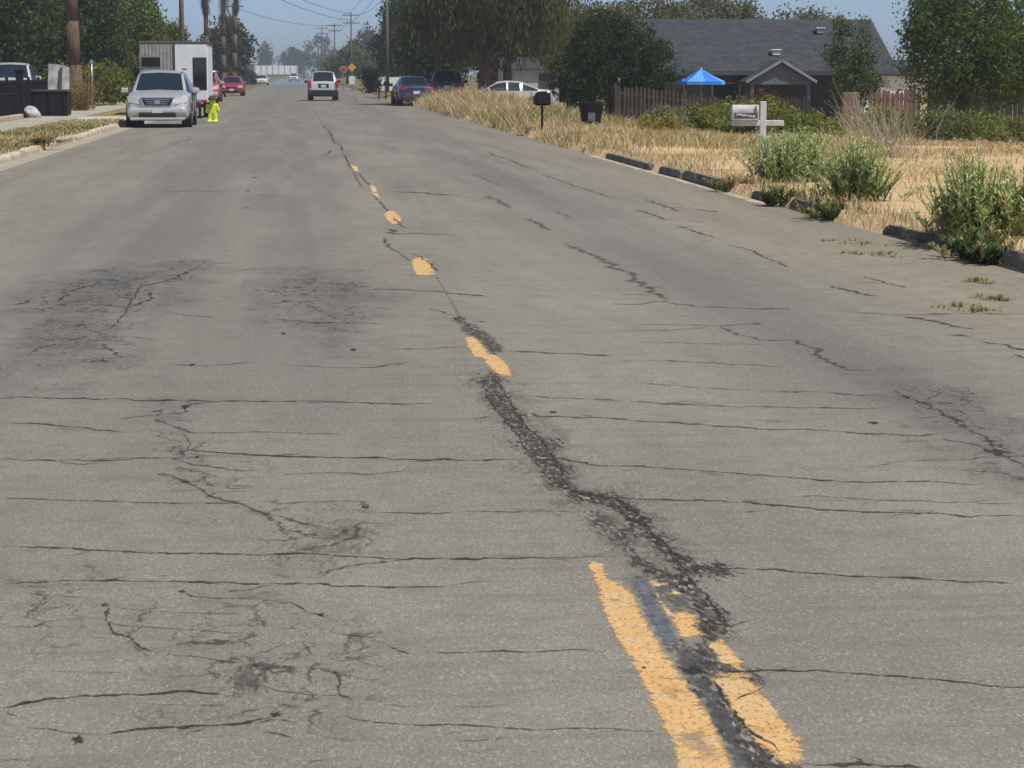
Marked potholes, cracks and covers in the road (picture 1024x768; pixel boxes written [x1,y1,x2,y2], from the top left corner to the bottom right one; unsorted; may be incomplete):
crack [909,314,1024,358]
crack [27,603,350,700]
crack [29,260,219,365]
crack [350,717,642,731]
crack [7,377,1023,630]
crack [646,201,715,236]
crack [256,268,366,331]
crack [832,276,905,296]
crack [109,718,287,736]
